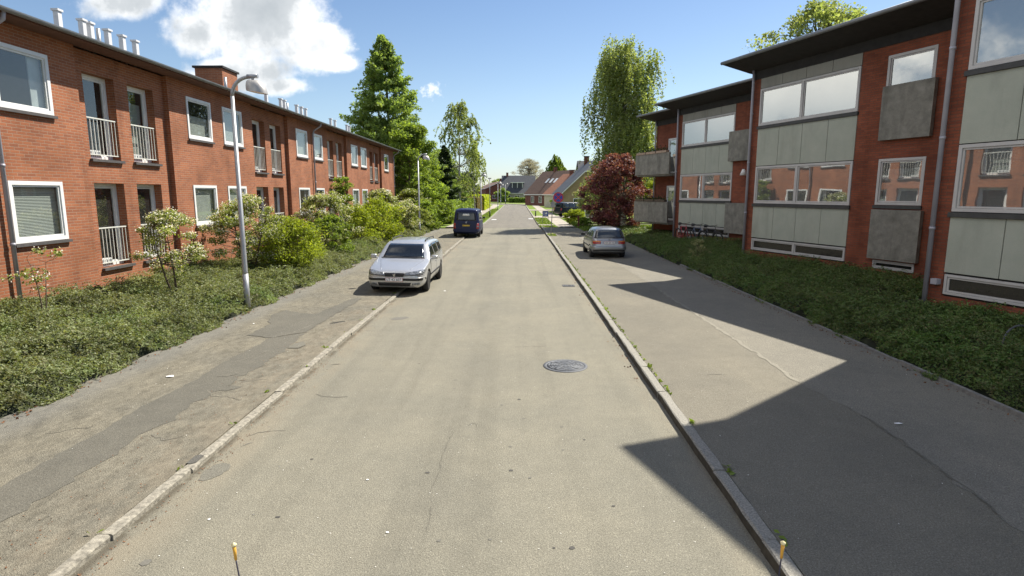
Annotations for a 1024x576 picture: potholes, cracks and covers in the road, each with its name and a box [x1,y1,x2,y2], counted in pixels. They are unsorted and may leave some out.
manhole cover [543,359,588,373]
crack [658,289,799,382]
crack [426,423,477,530]
crack [866,417,1002,517]
